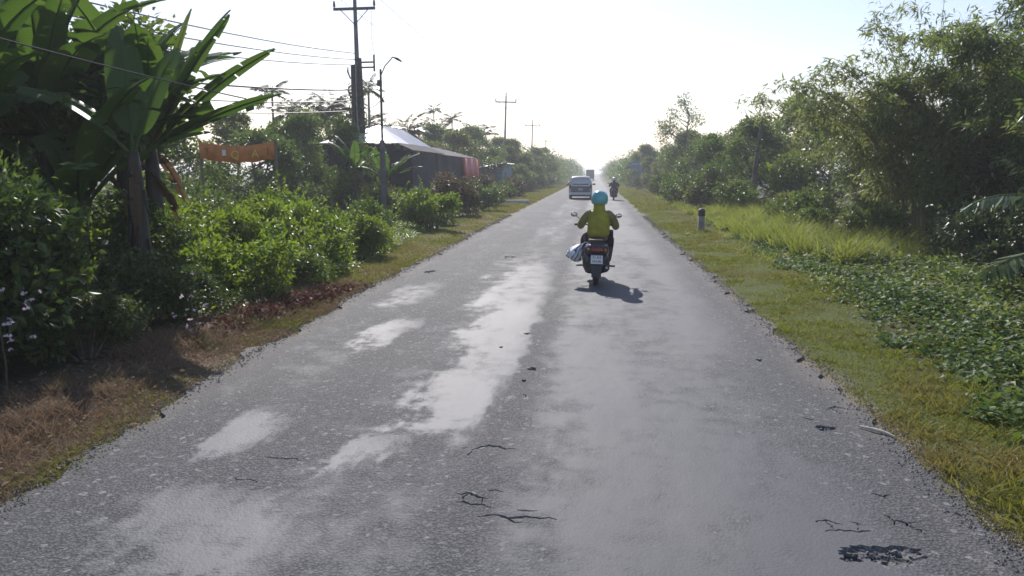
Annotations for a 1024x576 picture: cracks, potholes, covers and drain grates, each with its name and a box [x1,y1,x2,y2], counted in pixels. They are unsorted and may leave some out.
crack [457,489,557,523]
crack [815,493,926,535]
crack [467,445,516,456]
pothole [837,544,928,569]
